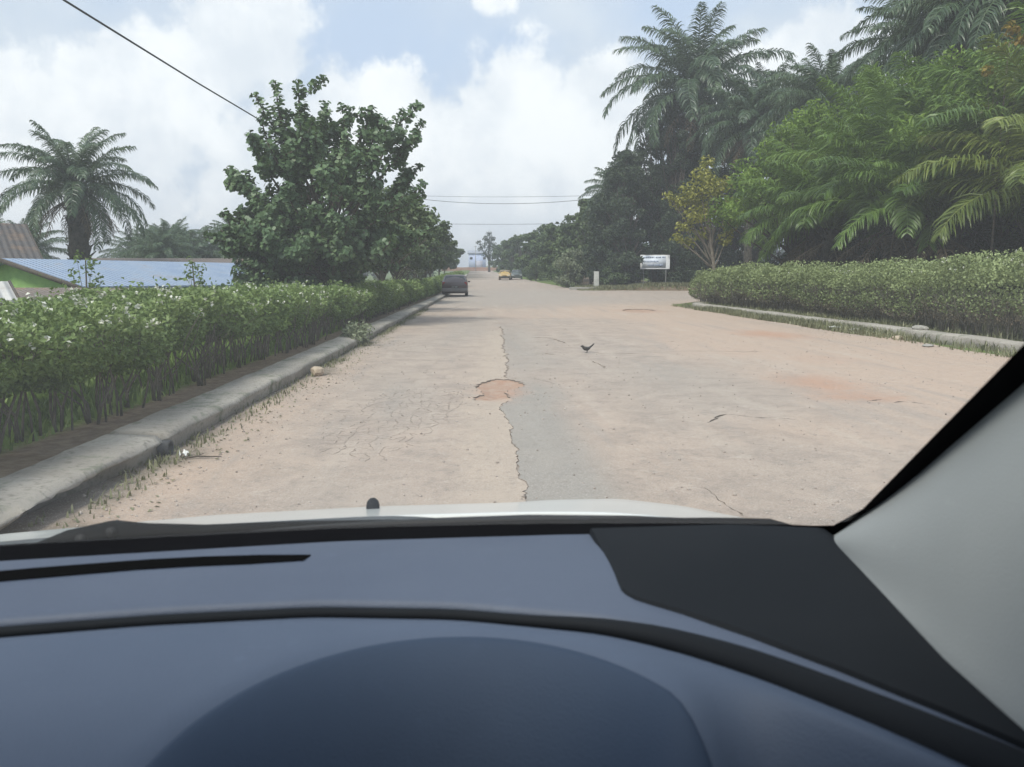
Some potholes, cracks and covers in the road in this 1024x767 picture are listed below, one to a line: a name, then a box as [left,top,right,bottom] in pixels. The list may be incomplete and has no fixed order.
pothole [473,379,526,401]
crack [321,386,466,461]
crack [499,326,529,502]
